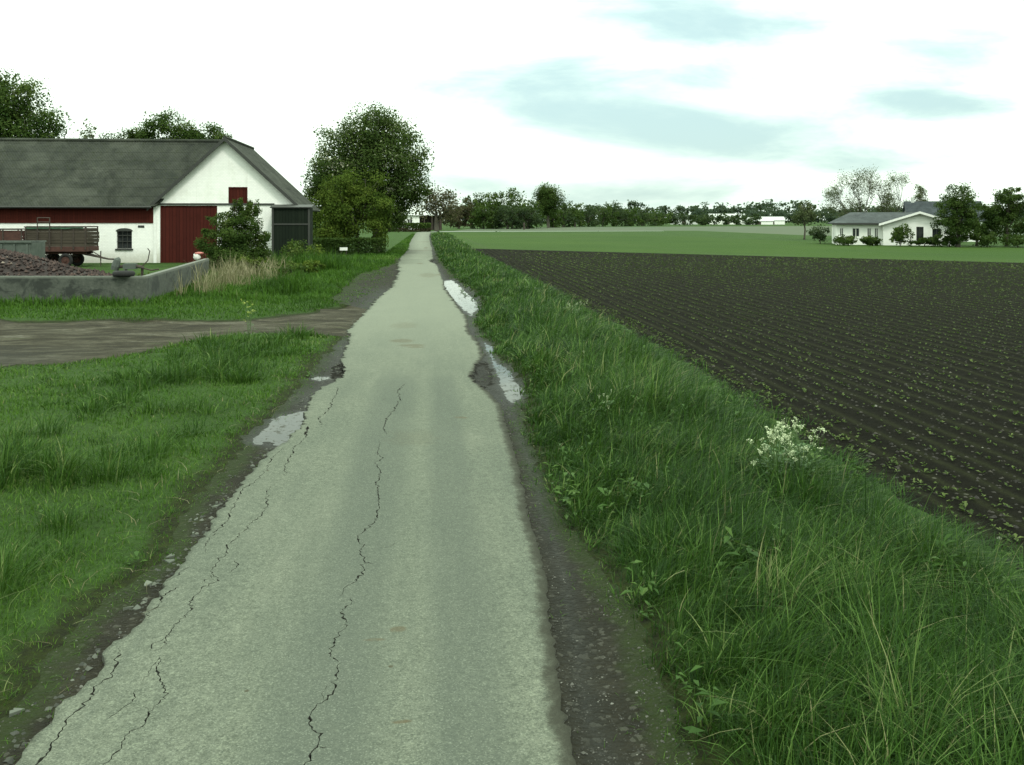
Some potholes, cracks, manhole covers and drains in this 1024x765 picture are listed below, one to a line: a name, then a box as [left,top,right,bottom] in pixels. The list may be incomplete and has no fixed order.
crack [304,383,406,765]
crack [35,388,339,765]
pothole [468,361,494,388]
pothole [330,363,346,381]
